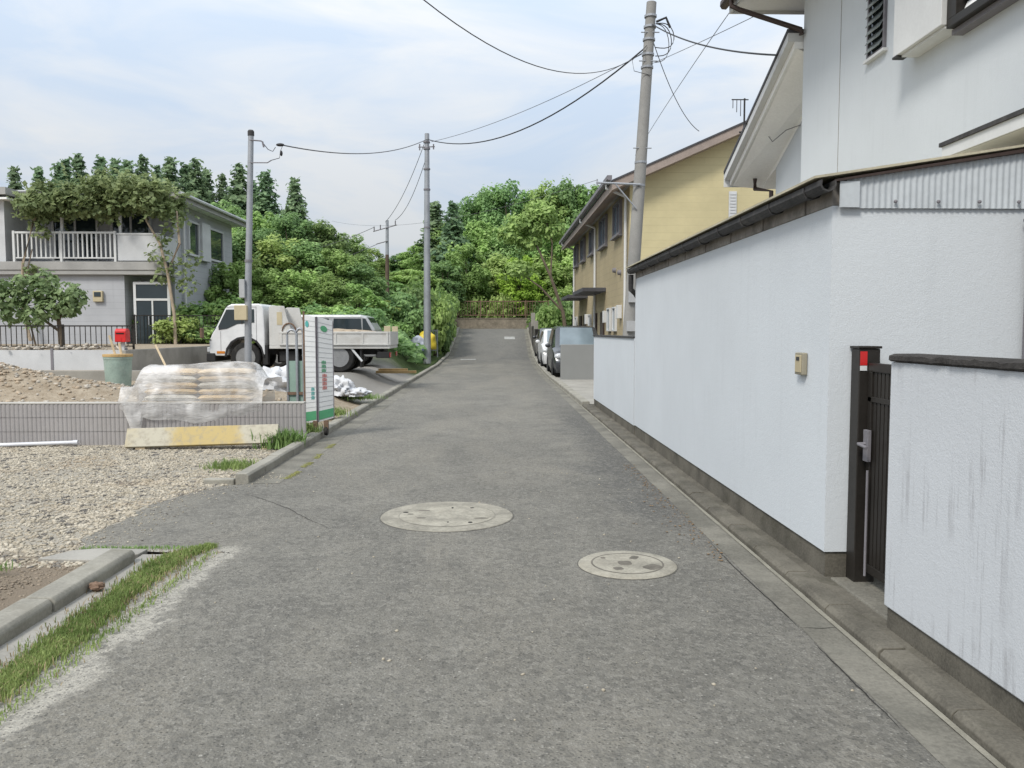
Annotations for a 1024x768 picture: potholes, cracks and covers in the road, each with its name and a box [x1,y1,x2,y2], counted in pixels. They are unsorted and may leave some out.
manhole cover [577,551,678,580]
manhole cover [379,502,514,532]
